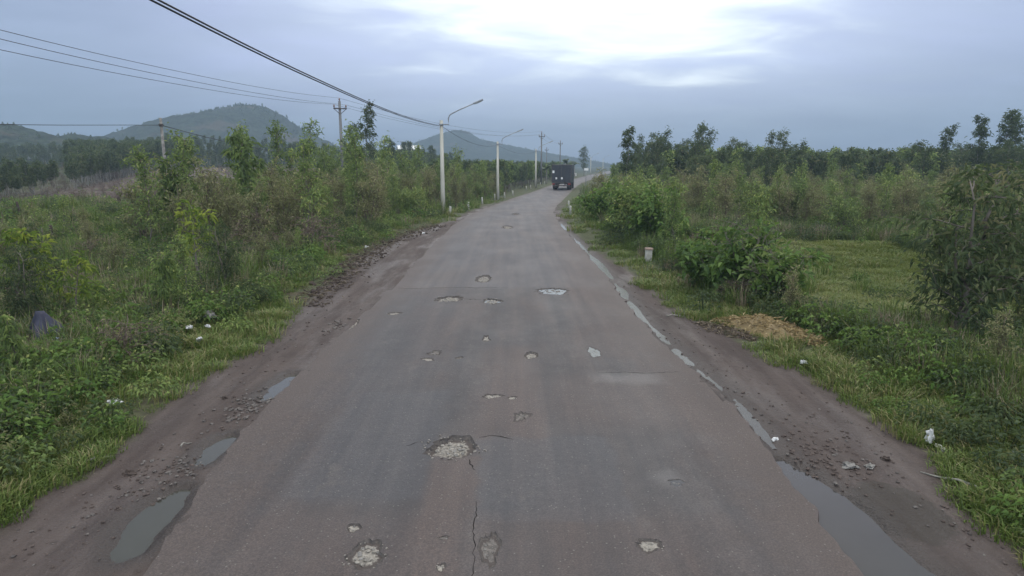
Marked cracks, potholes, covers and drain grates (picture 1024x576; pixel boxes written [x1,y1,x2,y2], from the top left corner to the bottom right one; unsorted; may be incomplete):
pothole [346,523,363,533]
pothole [342,538,388,570]
pothole [513,411,533,422]
pothole [537,287,573,295]
pothole [477,531,502,569]
pothole [421,434,487,461]
pothole [634,538,665,554]
pothole [587,346,603,358]
pothole [474,275,496,283]
